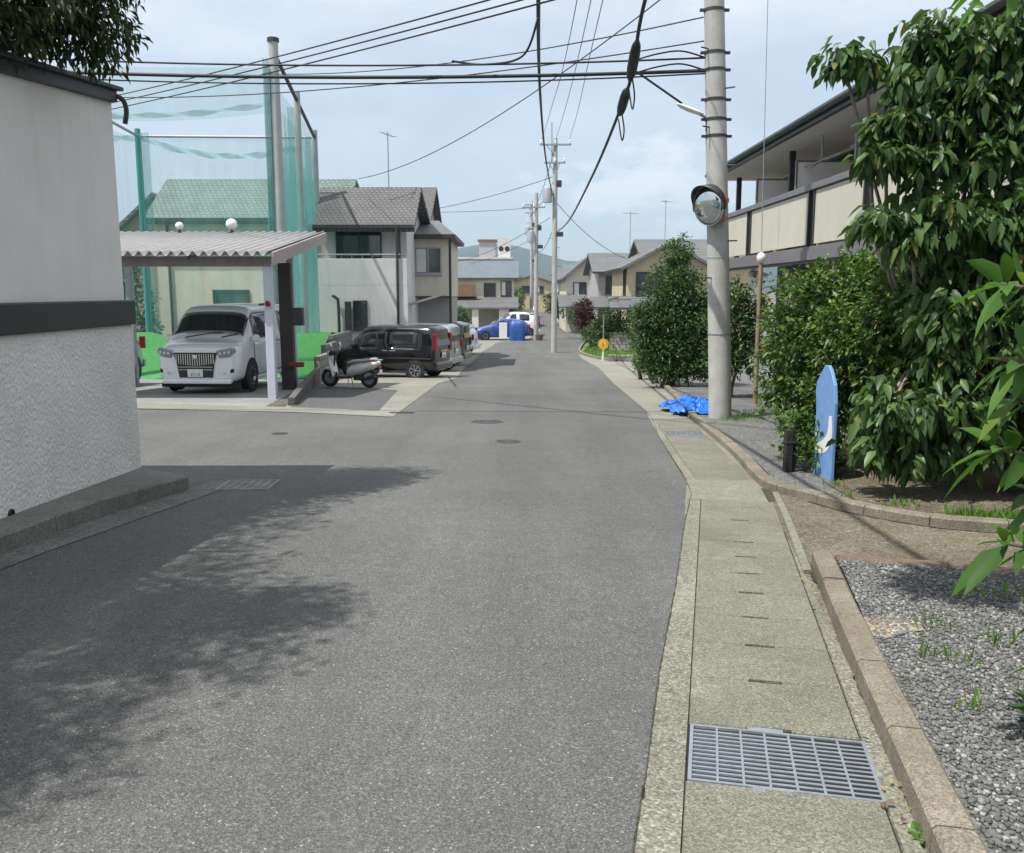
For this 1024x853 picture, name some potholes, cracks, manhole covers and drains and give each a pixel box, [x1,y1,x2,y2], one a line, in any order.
drain grate [687,723,887,806]
drain grate [215,479,280,490]
